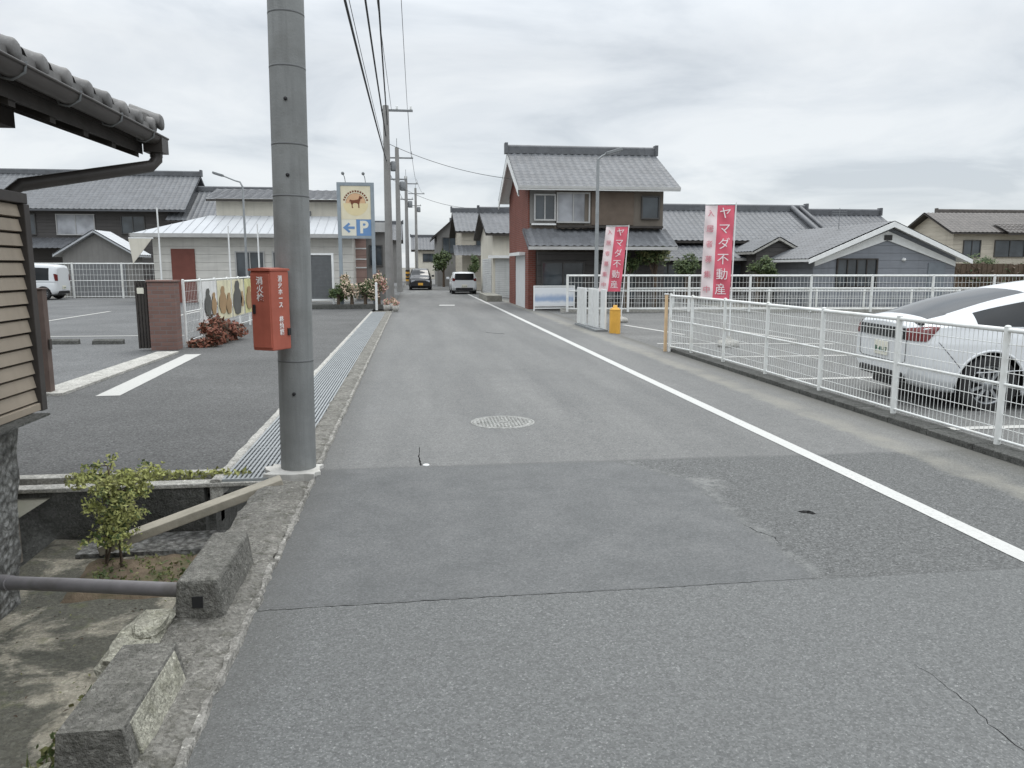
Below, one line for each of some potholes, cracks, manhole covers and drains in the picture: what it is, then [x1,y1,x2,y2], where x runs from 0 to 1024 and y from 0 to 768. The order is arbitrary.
drain grate [222,312,385,482]
crack [914,664,1023,750]
manhole cover [470,416,535,429]
